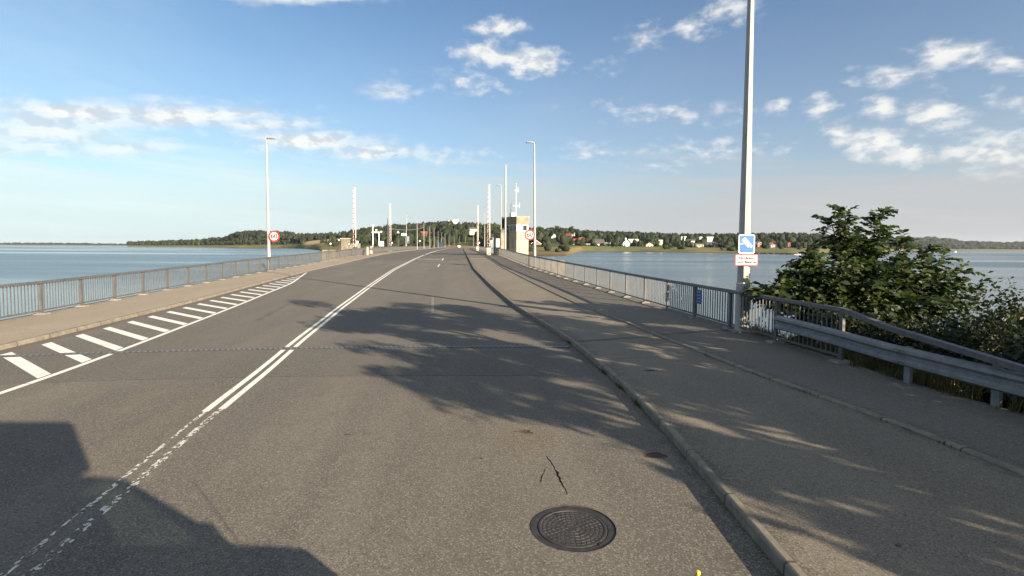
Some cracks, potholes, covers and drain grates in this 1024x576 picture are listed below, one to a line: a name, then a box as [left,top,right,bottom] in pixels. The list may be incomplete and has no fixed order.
crack [539,456,567,493]
manhole cover [529,505,617,552]
